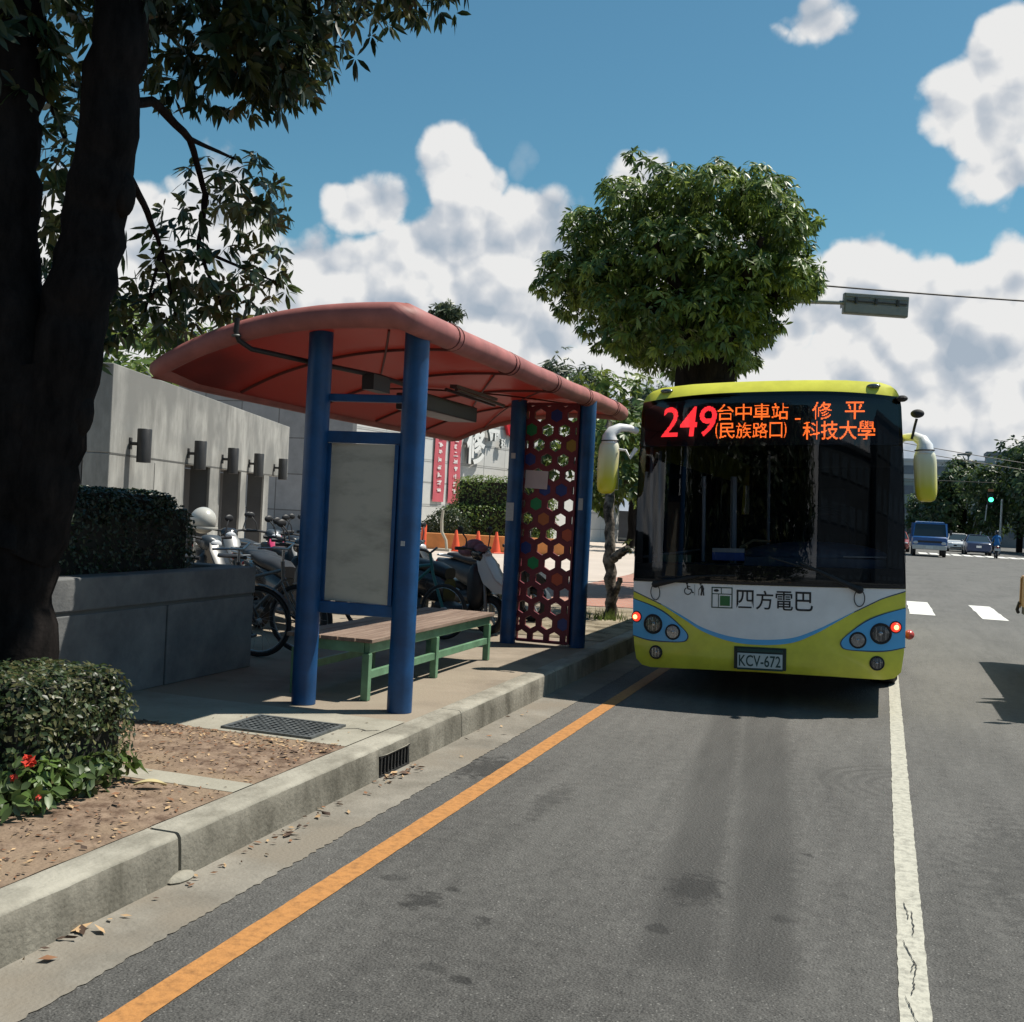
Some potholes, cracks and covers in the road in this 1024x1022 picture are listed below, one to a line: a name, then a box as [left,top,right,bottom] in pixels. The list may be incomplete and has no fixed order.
drain grate [221,714,346,740]
crack [903,903,918,1022]
drain grate [379,744,410,778]
